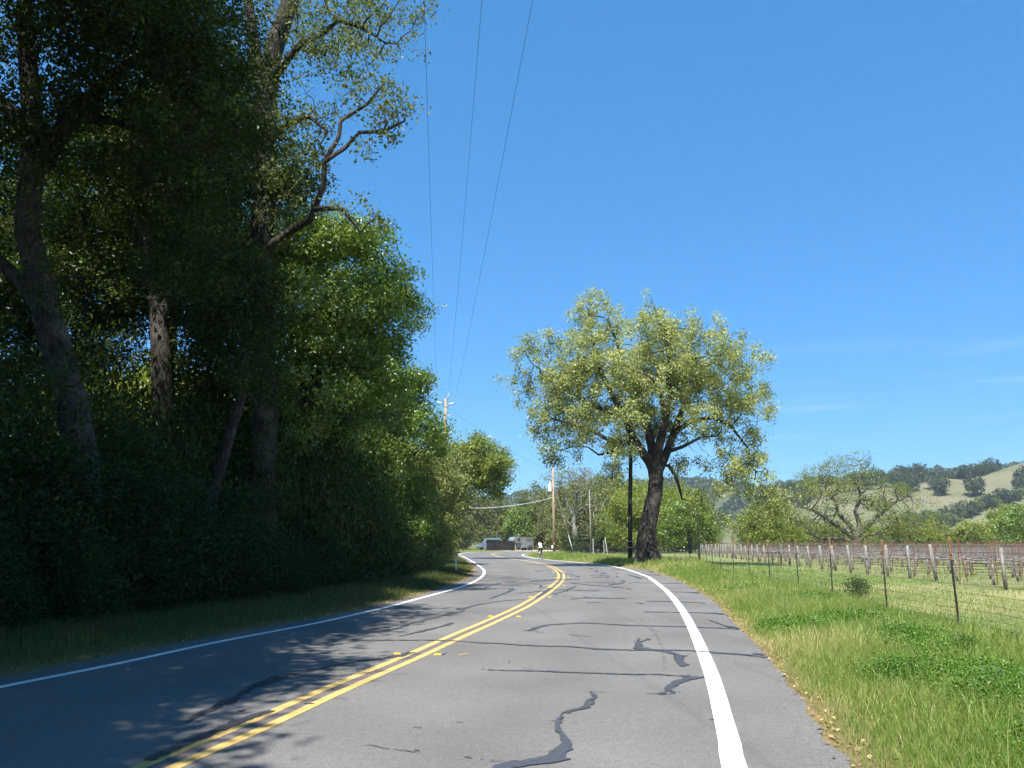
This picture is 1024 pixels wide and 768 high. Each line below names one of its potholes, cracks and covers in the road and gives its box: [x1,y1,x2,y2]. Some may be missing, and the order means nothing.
crack [525,564,653,603]
